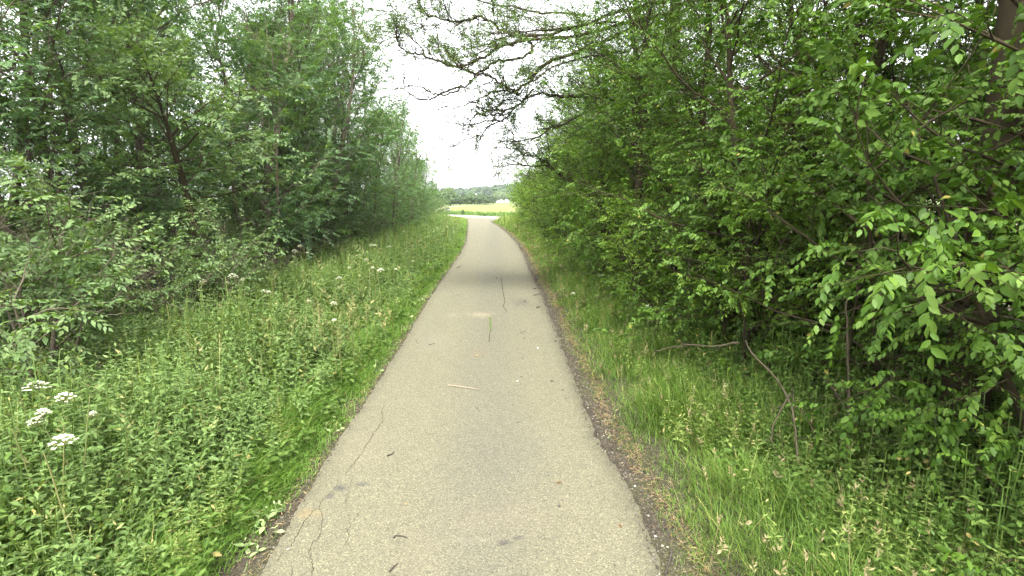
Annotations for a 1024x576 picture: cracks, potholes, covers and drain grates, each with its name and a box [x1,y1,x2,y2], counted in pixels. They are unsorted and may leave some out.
crack [489,279,507,341]
crack [278,406,384,576]
